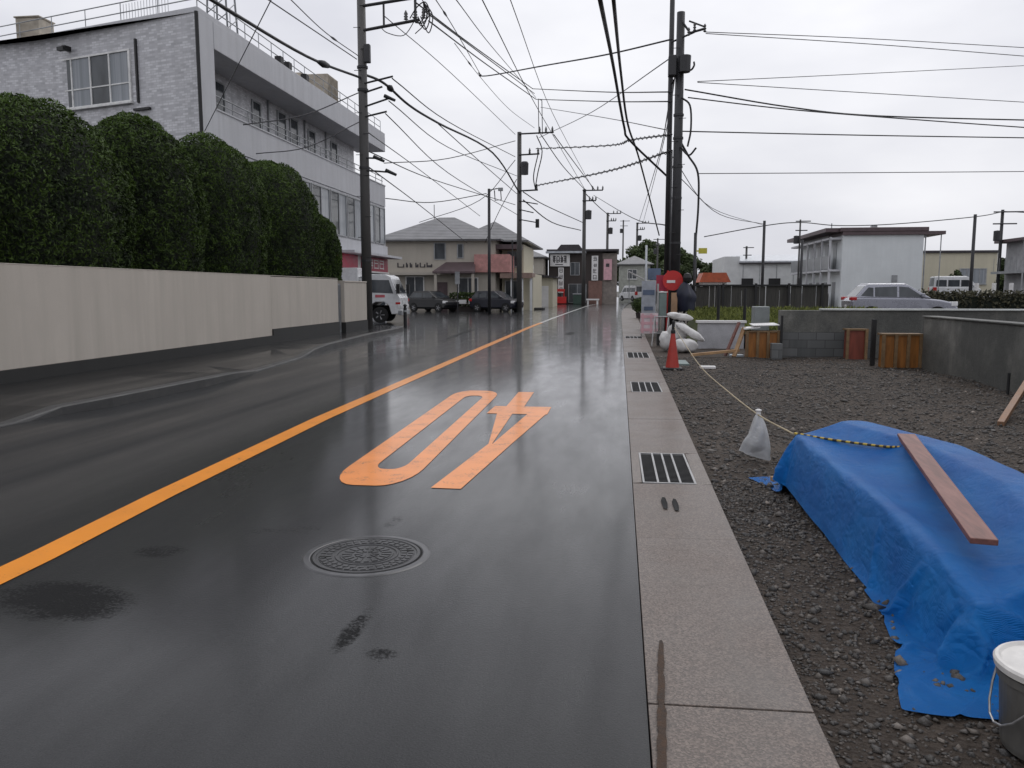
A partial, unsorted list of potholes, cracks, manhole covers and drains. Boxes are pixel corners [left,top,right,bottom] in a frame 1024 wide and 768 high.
manhole cover [302,535,431,578]
drain grate [639,452,697,485]
drain grate [630,382,663,392]
